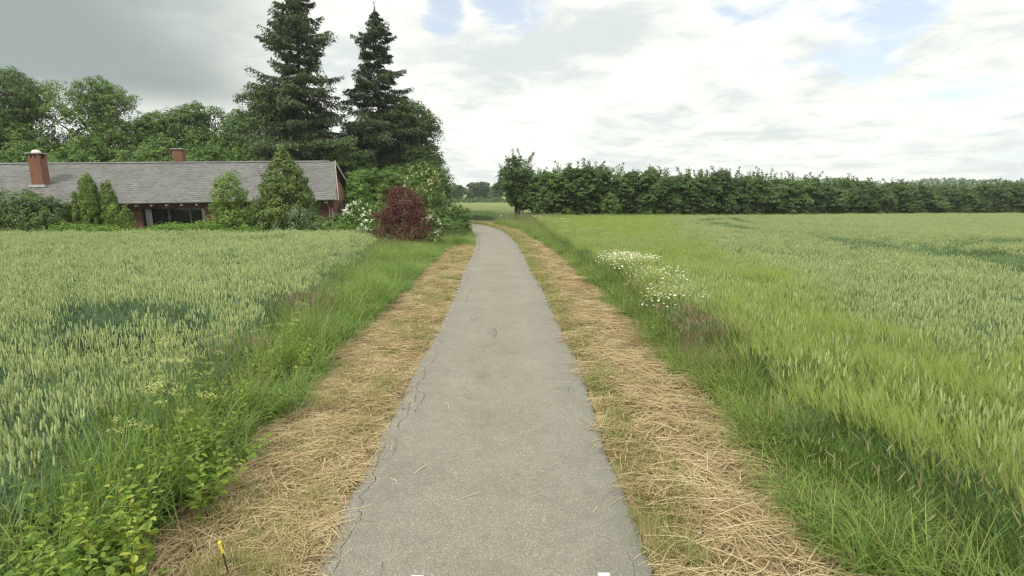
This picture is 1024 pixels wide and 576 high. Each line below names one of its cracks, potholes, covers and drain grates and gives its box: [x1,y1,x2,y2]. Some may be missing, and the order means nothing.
crack [333,342,442,572]
